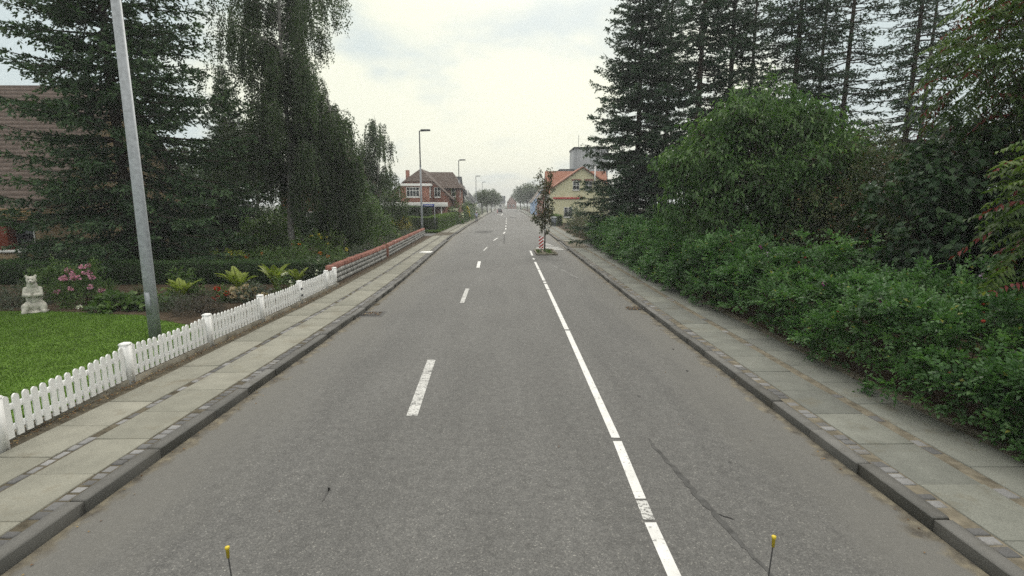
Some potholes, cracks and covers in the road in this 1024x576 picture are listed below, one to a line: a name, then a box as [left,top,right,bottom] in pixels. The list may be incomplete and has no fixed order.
crack [649,439,774,576]
